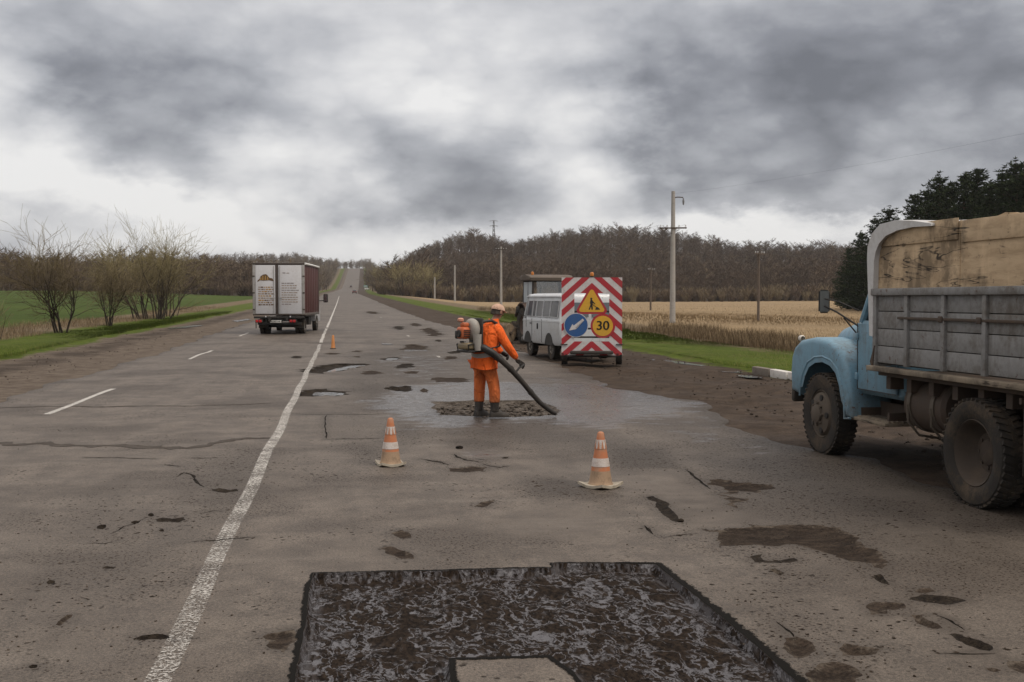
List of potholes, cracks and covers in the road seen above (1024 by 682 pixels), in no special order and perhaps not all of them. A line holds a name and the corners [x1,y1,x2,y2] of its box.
pothole [298,363,370,374]
pothole [431,400,560,417]
pothole [287,562,811,682]
pothole [646,496,679,522]
crack [169,458,204,487]
pothole [707,479,775,508]
pothole [910,594,966,605]
pothole [866,601,906,615]
